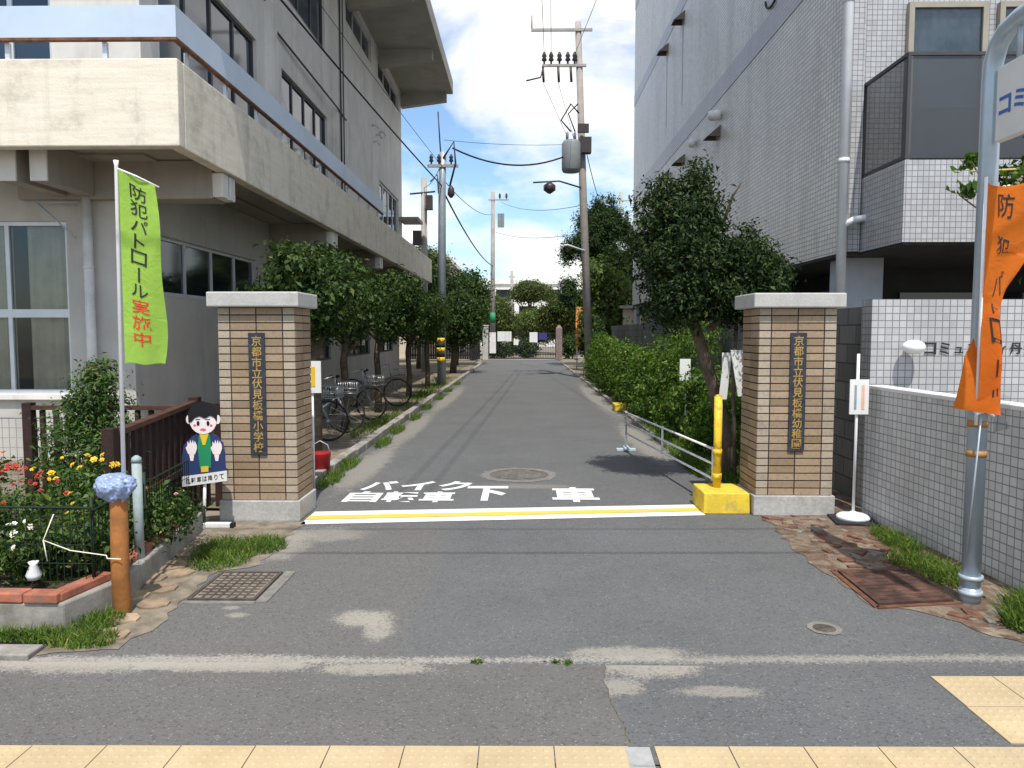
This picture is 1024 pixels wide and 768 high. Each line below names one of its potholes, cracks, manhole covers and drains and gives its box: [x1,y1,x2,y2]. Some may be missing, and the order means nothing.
crack [603,666,631,746]
manhole cover [830,568,964,609]
manhole cover [479,468,557,482]
manhole cover [806,621,842,635]
